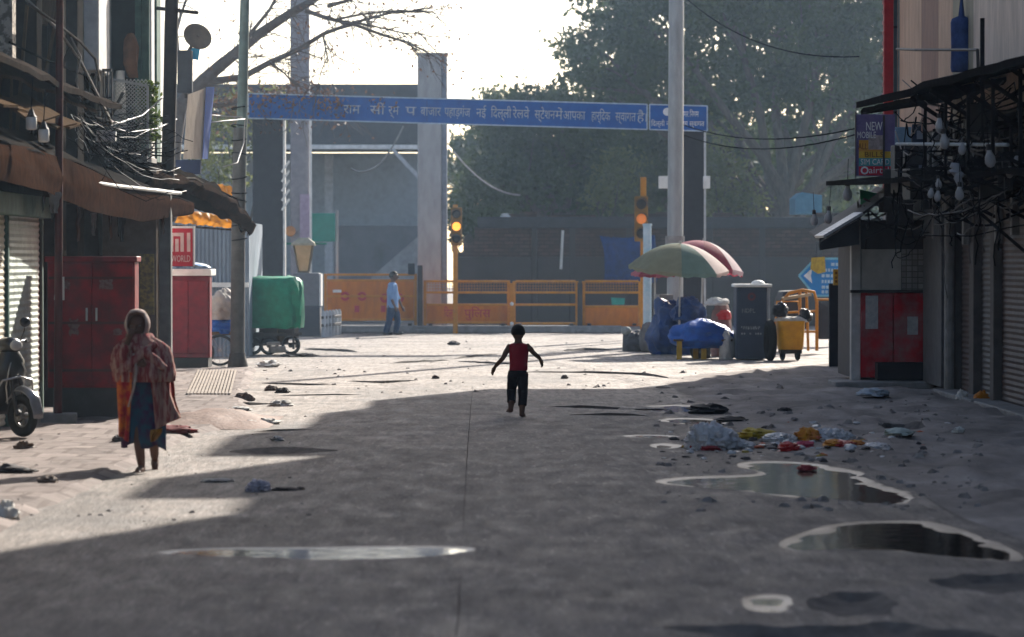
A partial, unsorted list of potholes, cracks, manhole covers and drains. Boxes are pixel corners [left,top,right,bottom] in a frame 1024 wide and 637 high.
crack [551,404,669,416]
pothole [157,546,475,559]
pothole [779,520,1024,561]
pothole [656,461,914,504]
pothole [742,594,793,612]
